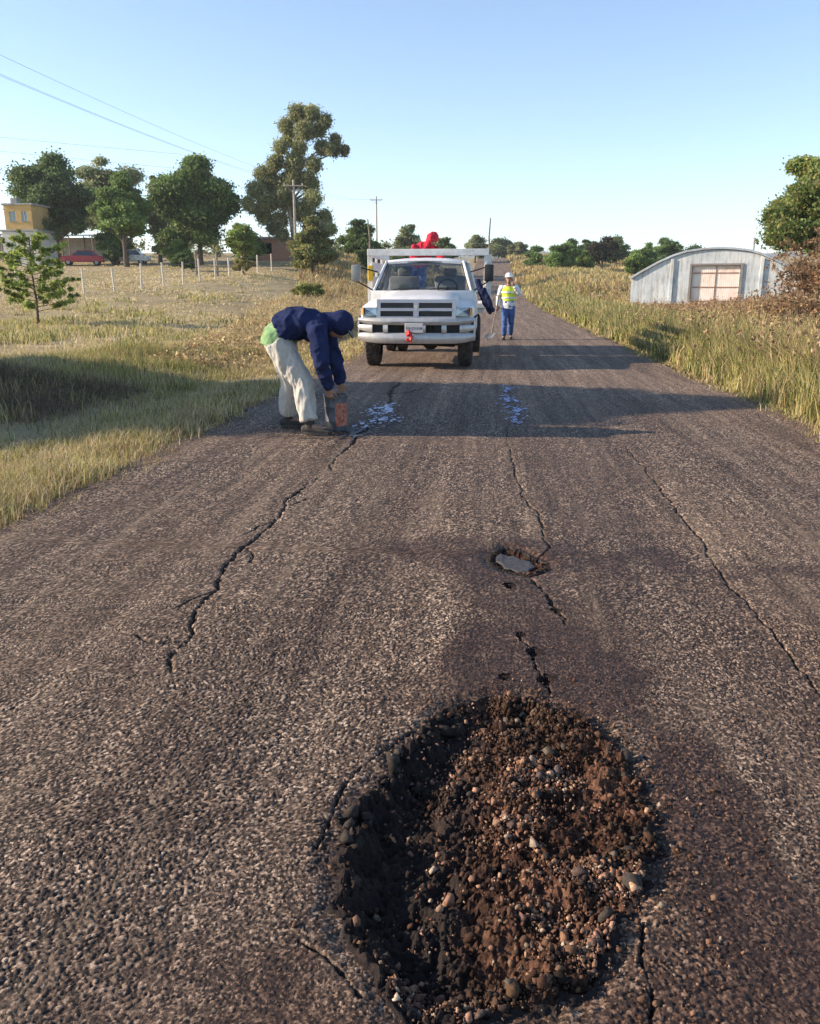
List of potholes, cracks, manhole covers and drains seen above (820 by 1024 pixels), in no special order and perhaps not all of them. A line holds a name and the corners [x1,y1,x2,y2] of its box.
crack [168,491,301,668]
pothole [486,547,551,578]
pothole [192,642,818,1024]
